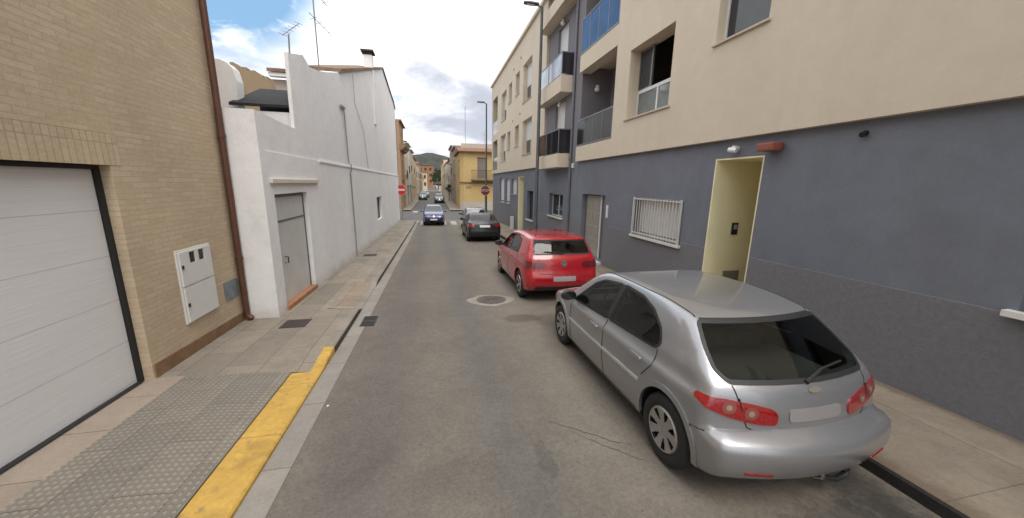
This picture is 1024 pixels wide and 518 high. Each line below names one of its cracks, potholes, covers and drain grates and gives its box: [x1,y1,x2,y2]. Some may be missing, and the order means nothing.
crack [549,421,648,462]
drain grate [359,316,378,327]
manhole cover [466,295,514,306]
utility cover [278,319,312,329]
